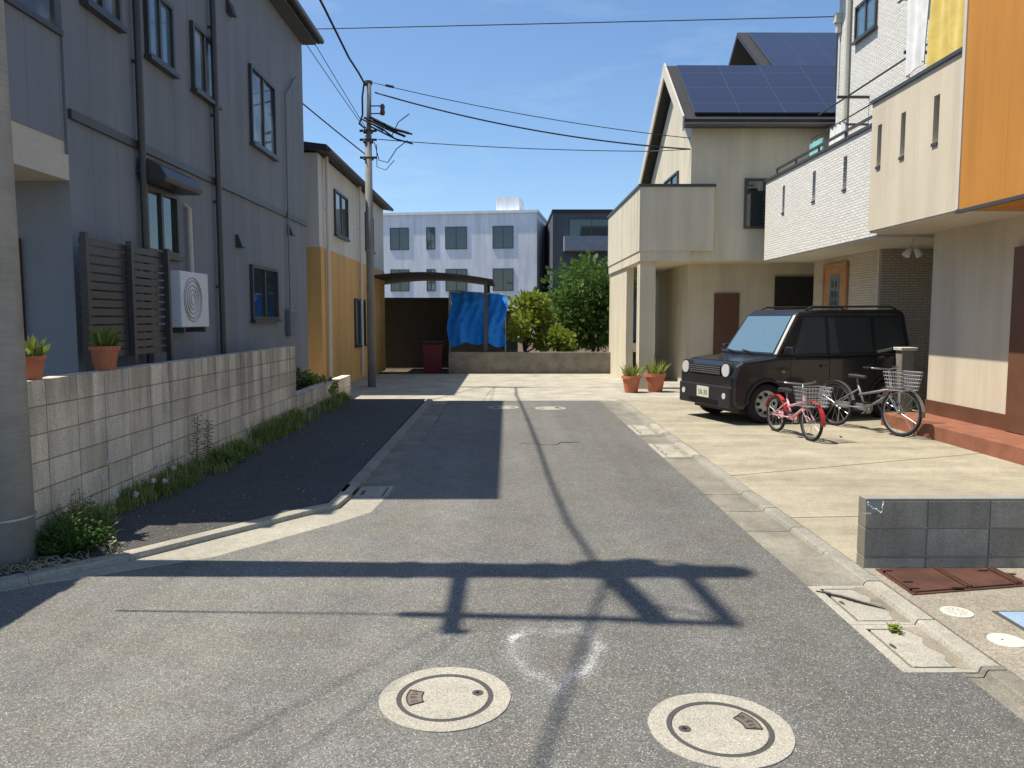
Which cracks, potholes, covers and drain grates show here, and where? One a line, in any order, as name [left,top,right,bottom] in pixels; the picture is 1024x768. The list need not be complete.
utility cover [876,566,1024,596]
manhole cover [379,667,511,733]
utility cover [986,633,1024,648]
manhole cover [648,693,795,768]
